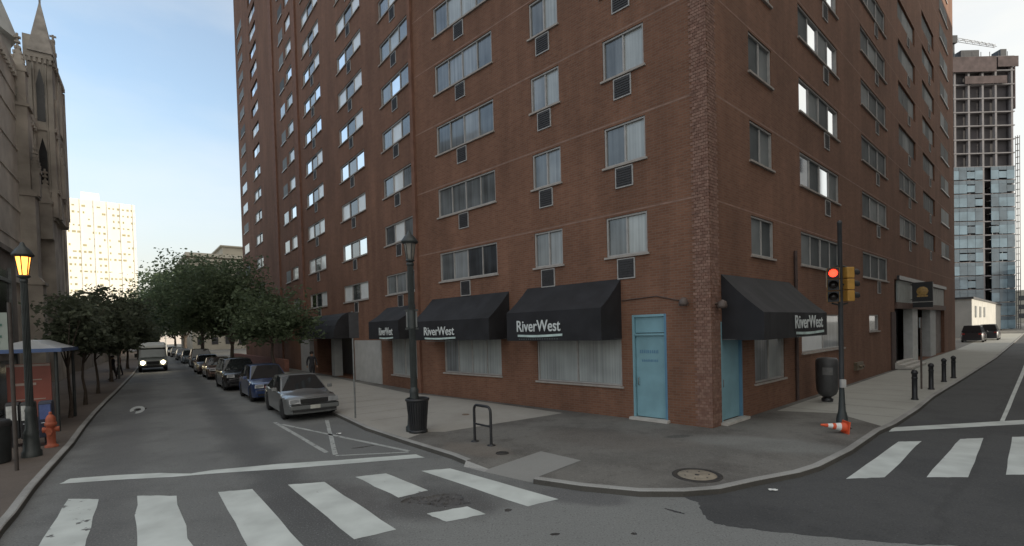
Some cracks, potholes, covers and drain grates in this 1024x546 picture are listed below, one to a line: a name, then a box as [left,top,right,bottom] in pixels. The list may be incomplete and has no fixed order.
manhole cover [672,468,723,483]
pothole [401,493,471,507]
